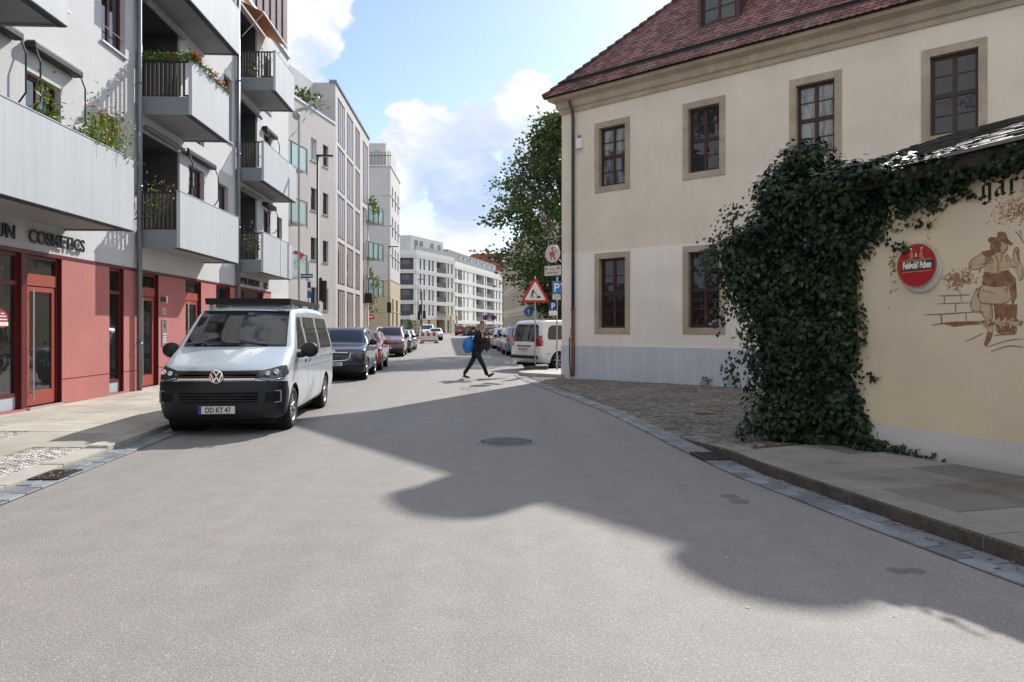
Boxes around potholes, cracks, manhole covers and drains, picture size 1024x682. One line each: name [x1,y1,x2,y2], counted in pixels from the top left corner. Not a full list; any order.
manhole cover [476,437,537,447]
drain grate [27,469,83,481]
drain grate [689,452,730,461]
